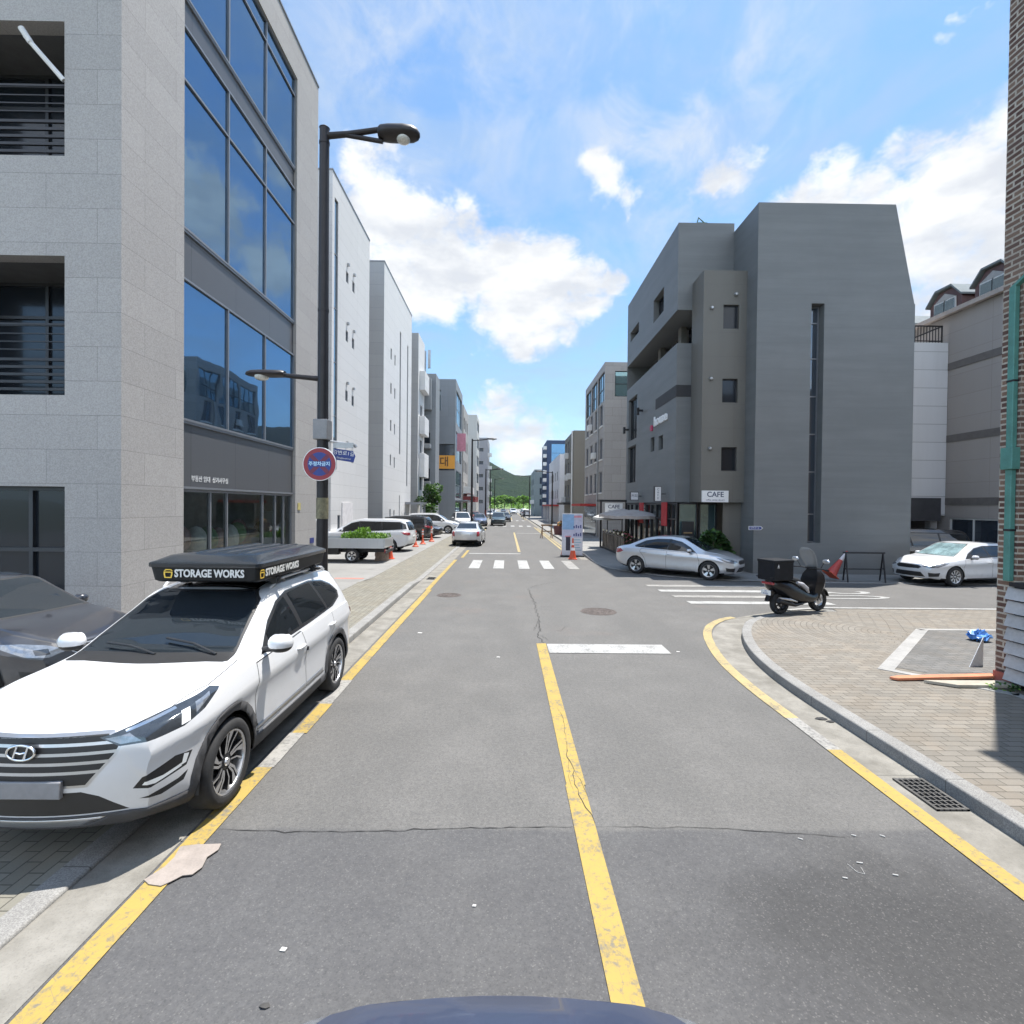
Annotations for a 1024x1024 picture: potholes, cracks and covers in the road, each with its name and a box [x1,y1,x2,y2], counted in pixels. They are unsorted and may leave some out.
crack [561,714,594,819]
crack [528,584,564,643]
drain grate [892,778,970,811]
